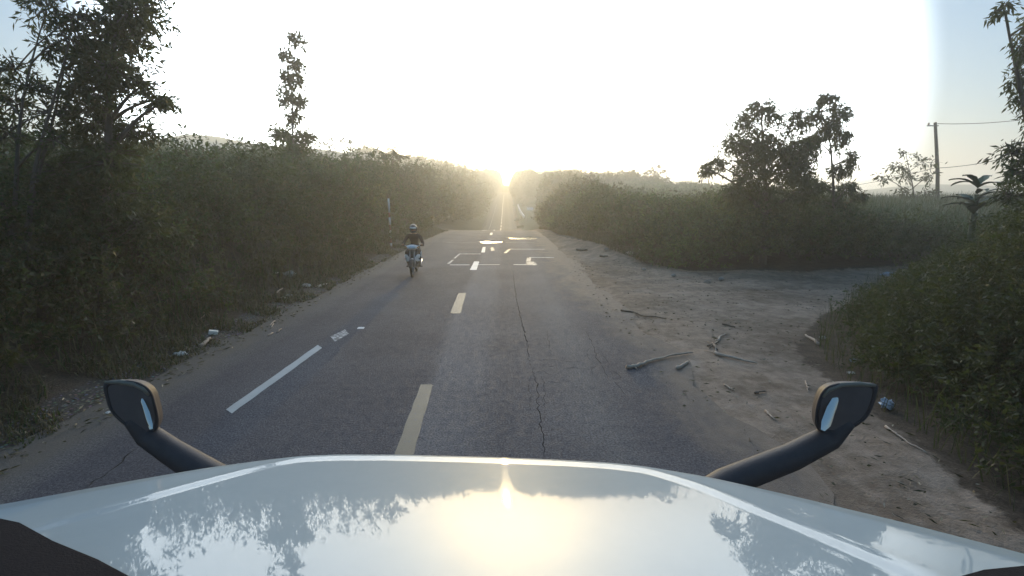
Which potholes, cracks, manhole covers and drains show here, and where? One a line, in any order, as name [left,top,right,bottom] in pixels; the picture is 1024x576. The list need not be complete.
crack [513,277,627,452]
